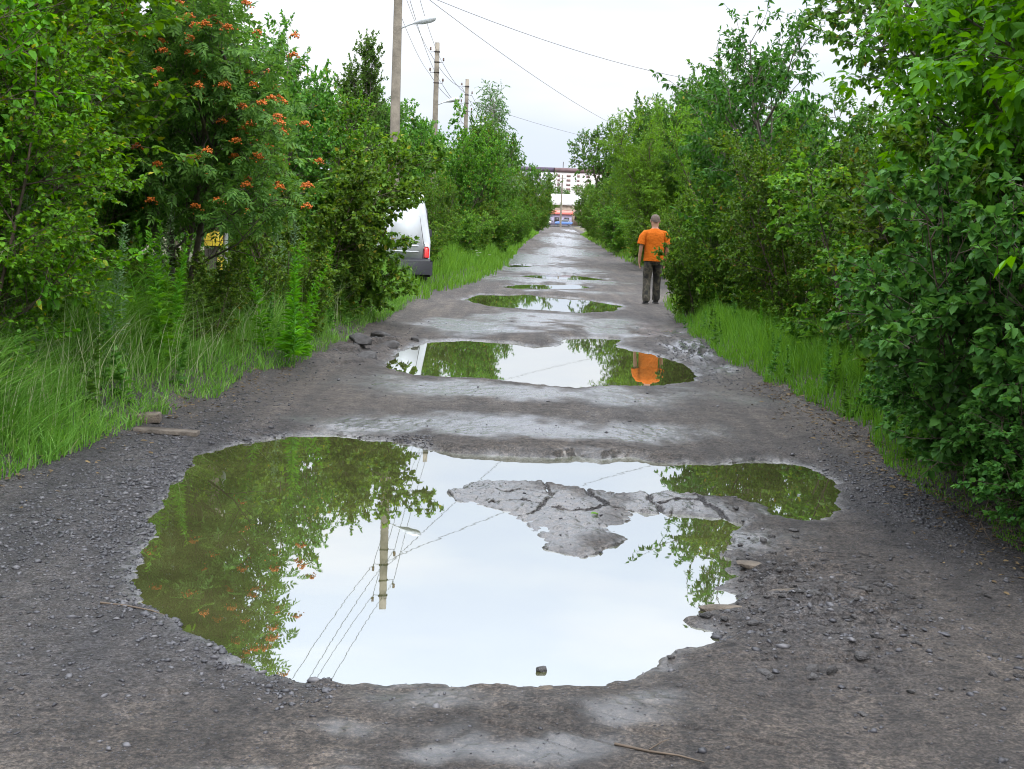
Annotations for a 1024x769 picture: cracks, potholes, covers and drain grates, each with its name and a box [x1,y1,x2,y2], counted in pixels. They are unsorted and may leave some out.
crack [486,480,637,516]
pothole [111,429,861,694]
pothole [454,292,631,313]
pothole [375,335,706,388]
